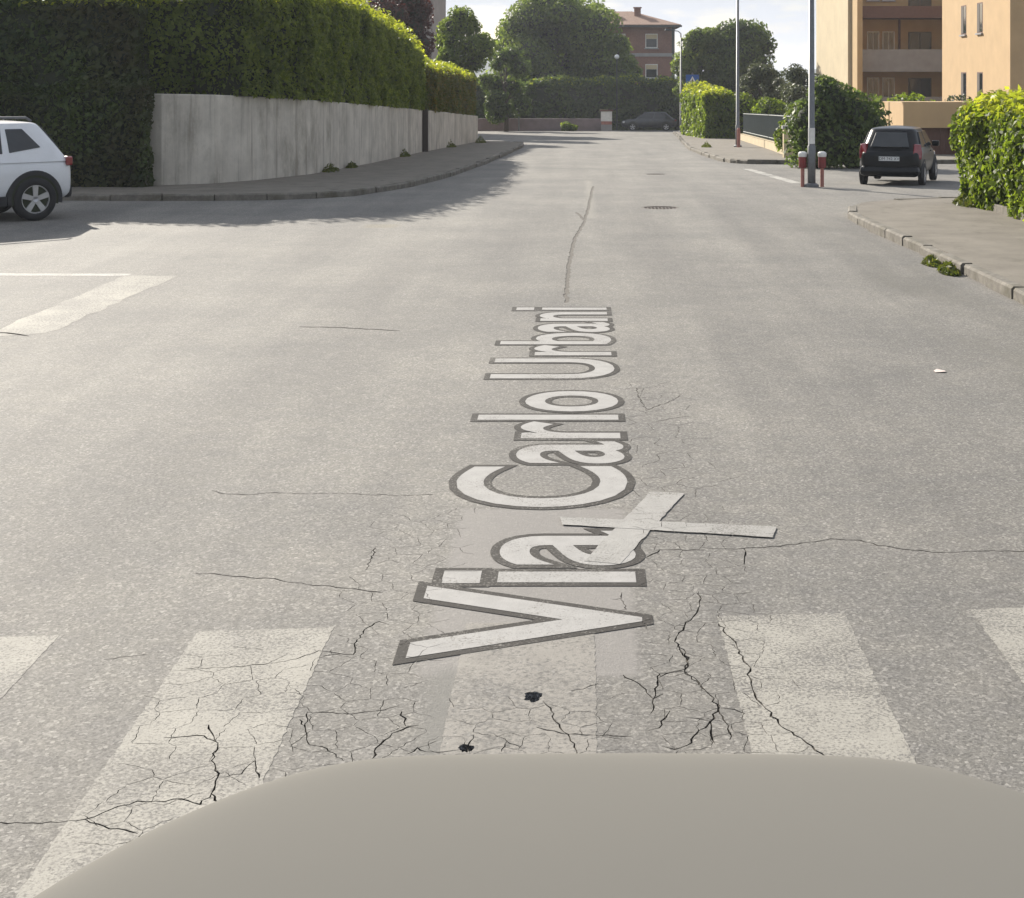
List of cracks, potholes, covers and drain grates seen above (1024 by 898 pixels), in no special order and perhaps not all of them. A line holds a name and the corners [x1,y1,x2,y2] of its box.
pothole [524,692,542,702]
crack [0,504,824,845]
crack [715,538,1024,564]
crack [625,376,738,498]
